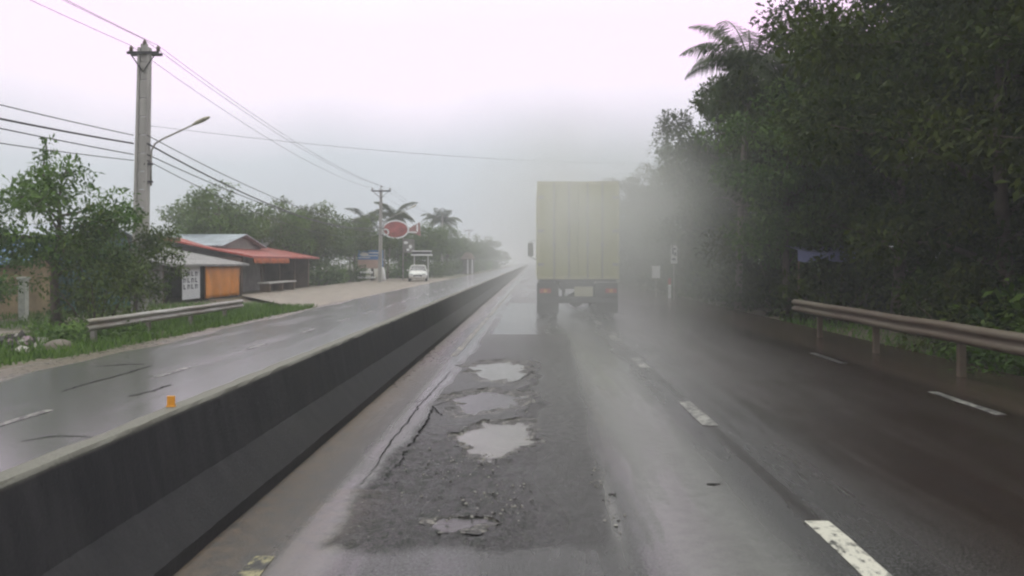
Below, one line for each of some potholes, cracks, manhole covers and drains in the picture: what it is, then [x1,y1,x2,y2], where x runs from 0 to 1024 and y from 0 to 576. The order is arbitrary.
crack [360,371,451,484]
pothole [454,359,538,385]
pothole [418,515,503,535]
pothole [436,386,540,419]
pothole [446,417,546,464]
